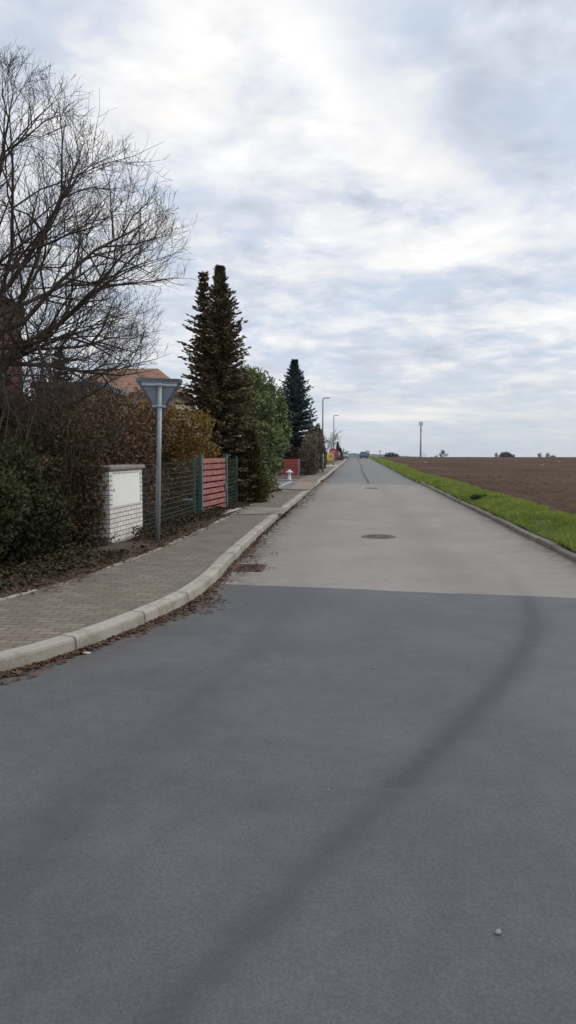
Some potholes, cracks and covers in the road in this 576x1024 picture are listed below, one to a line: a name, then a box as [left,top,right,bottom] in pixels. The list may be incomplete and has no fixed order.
drain grate [231,564,267,572]
